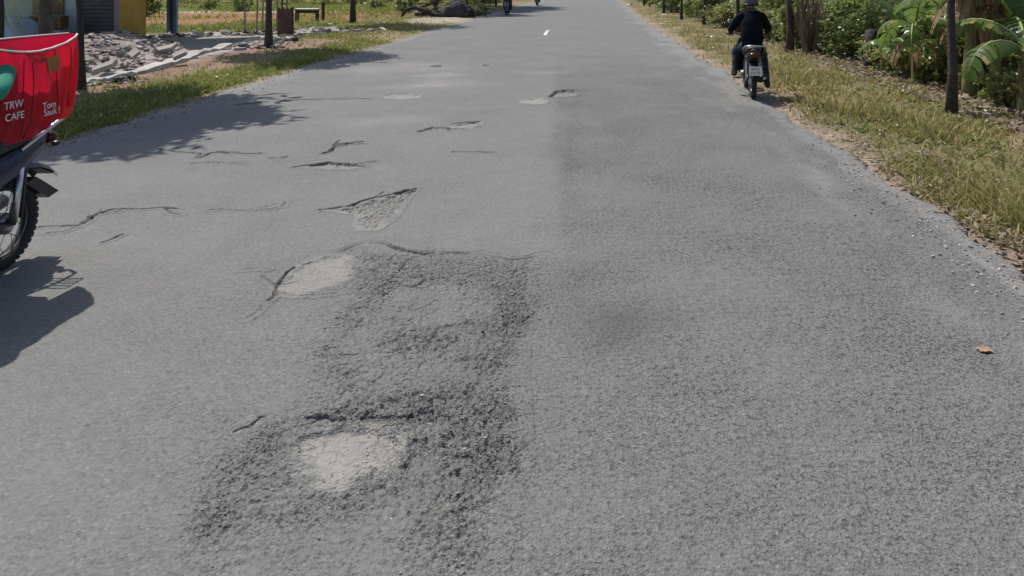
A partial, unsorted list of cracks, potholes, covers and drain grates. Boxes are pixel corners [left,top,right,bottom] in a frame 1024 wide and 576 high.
pothole [253,253,361,307]
pothole [275,404,445,501]
crack [153,148,293,166]
crack [316,139,369,155]
pothole [313,187,422,233]
crack [36,200,553,576]
